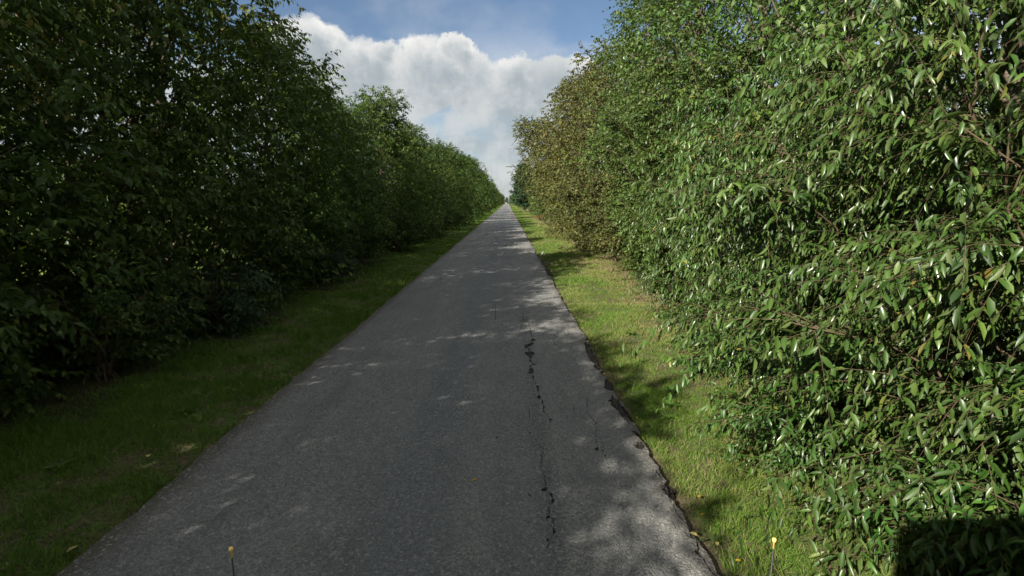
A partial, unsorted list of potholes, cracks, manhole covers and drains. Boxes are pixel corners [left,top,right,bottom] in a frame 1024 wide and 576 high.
crack [519,313,555,547]
